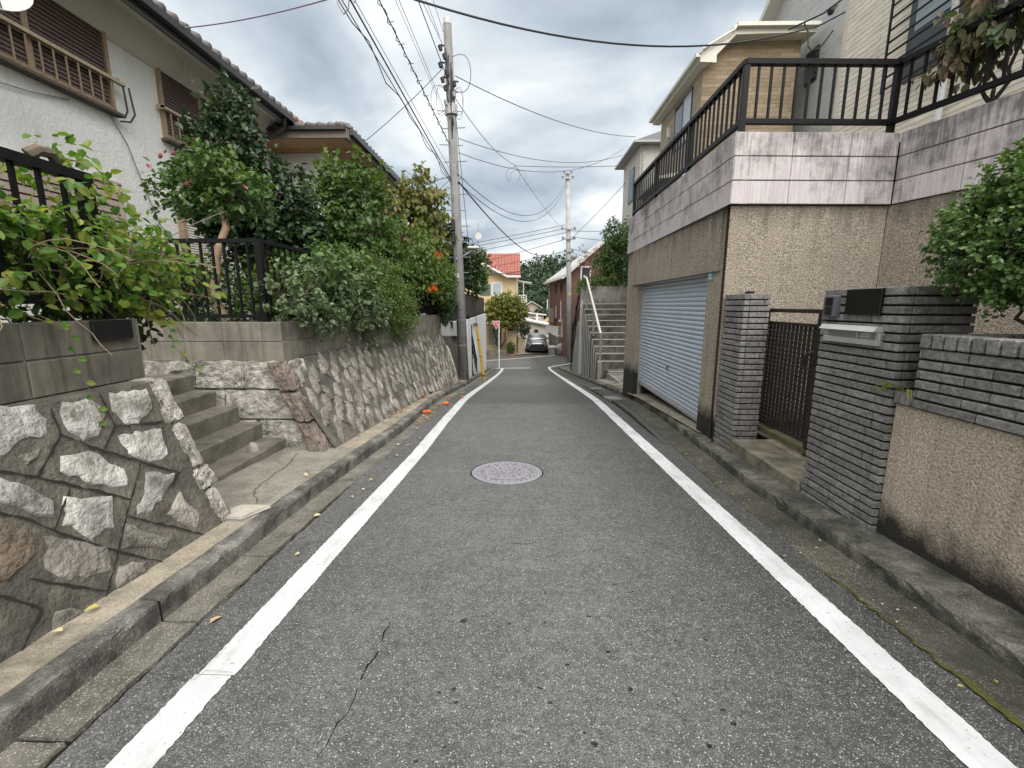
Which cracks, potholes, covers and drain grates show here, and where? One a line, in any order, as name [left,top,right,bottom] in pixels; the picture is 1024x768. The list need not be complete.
crack [317,622,390,757]
manhole cover [470,461,544,485]
